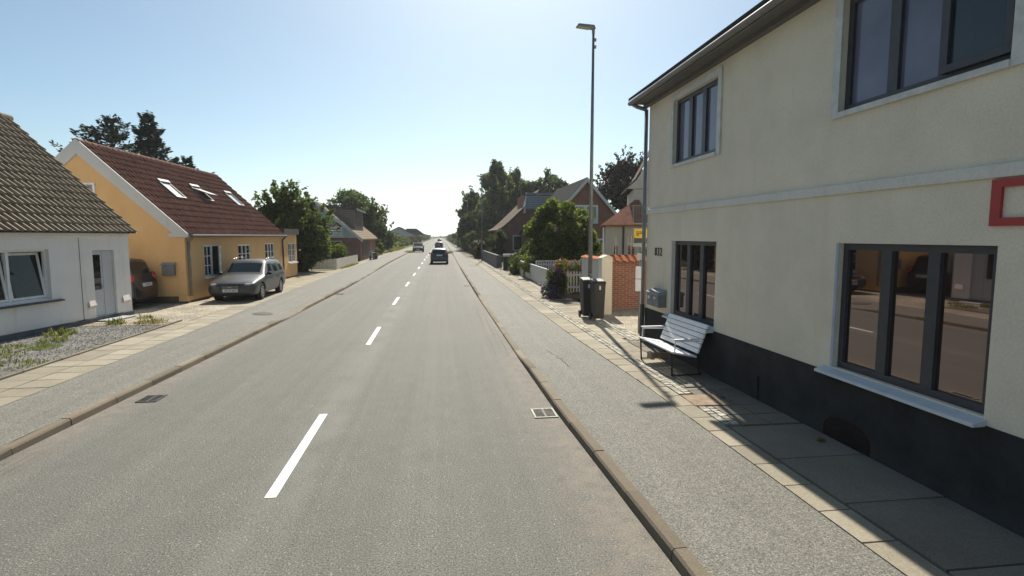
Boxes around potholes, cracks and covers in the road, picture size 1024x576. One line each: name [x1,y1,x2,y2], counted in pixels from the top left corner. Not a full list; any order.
drain grate [530,408,558,418]
drain grate [135,394,168,403]
